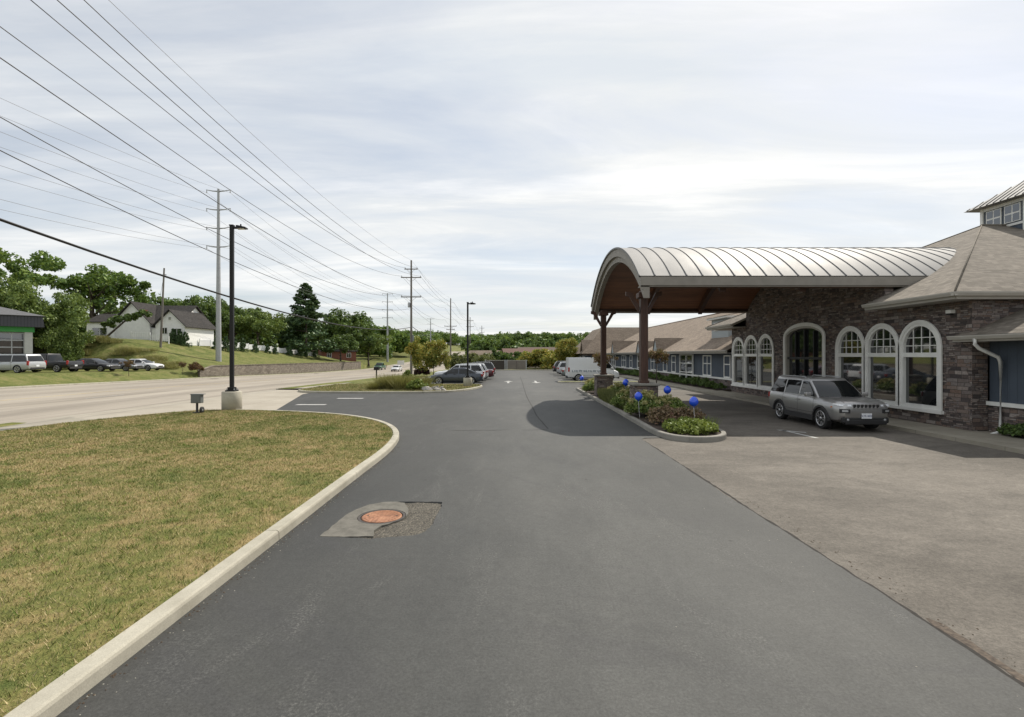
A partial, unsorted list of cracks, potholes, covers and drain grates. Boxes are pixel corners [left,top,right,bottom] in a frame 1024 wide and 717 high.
manhole cover [357,509,406,524]
